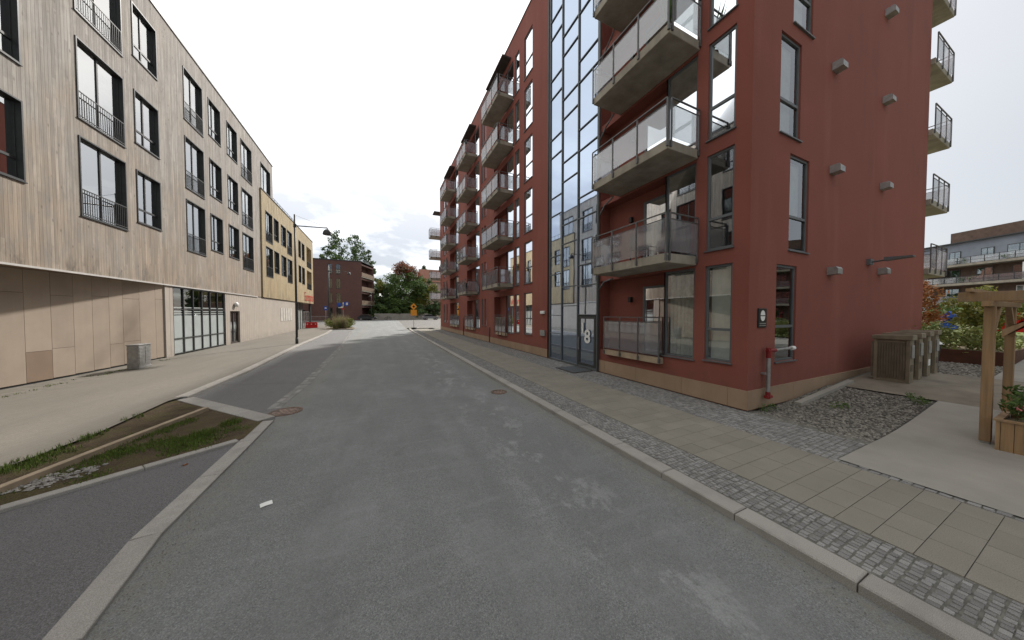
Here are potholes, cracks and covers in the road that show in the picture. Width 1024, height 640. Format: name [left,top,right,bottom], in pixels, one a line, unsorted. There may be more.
manhole cover [268,407,303,417]
